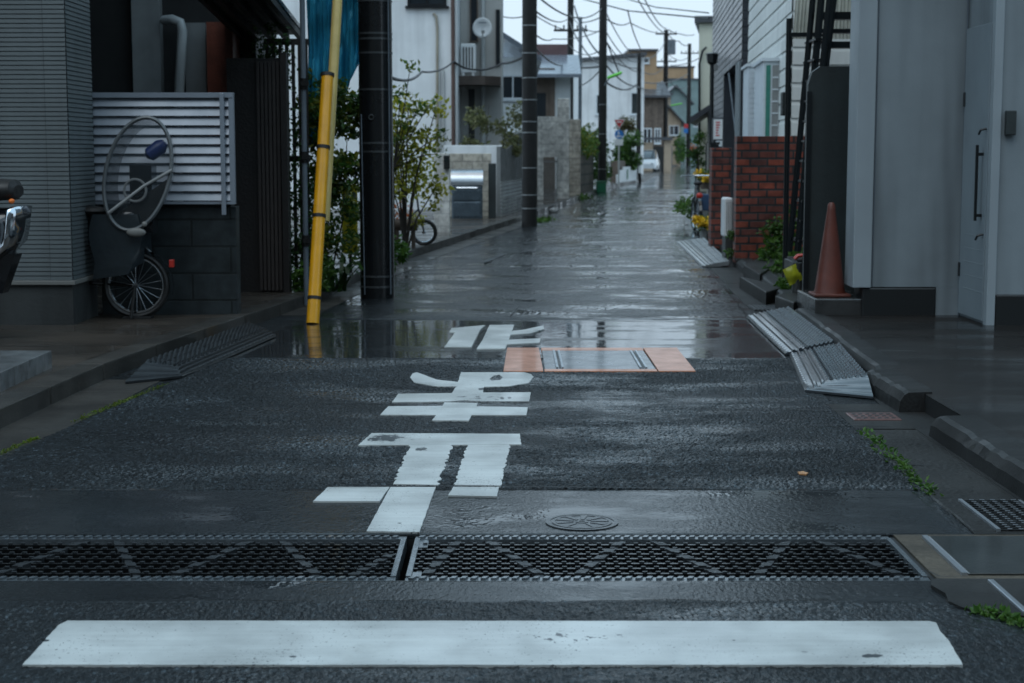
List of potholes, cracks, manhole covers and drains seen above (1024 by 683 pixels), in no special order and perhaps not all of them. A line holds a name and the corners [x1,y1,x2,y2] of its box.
drain grate [0,535,407,581]
drain grate [405,535,931,581]
manhole cover [546,513,618,536]
drain grate [958,499,1024,532]
utility cover [503,348,696,372]
